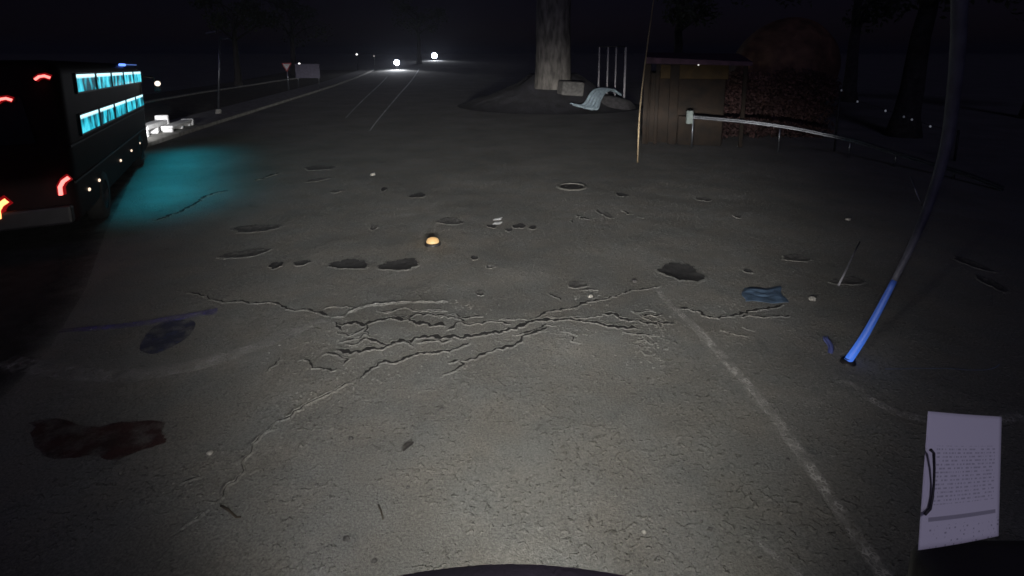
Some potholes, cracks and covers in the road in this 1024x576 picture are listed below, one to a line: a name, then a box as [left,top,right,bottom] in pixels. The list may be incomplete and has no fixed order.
pothole [230,224,287,234]
pothole [782,254,814,262]
pothole [325,258,371,269]
pothole [374,258,421,272]
crack [179,285,790,530]
pothole [827,276,868,285]
manhole cover [556,183,588,191]
pothole [215,248,275,259]
pothole [654,262,709,283]
